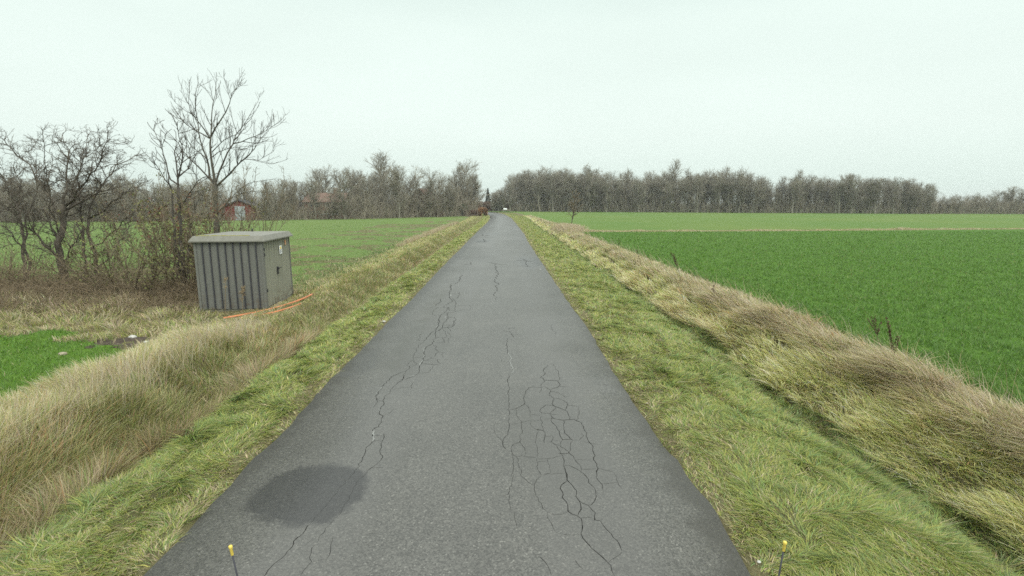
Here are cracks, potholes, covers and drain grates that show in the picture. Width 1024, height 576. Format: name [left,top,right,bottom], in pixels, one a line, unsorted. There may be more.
crack [494,364,622,576]
crack [265,262,471,575]
